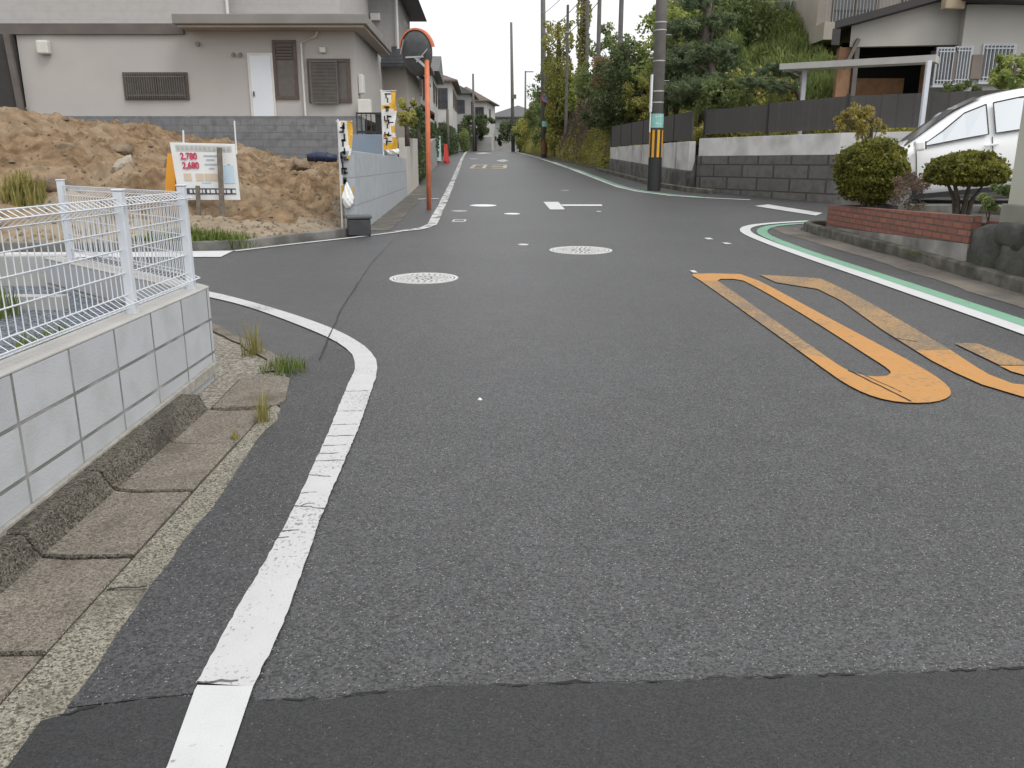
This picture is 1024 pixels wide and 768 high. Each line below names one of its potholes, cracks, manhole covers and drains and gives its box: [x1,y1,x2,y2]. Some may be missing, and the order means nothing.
manhole cover [549,246,612,255]
crack [319,239,394,359]
manhole cover [389,273,458,284]
